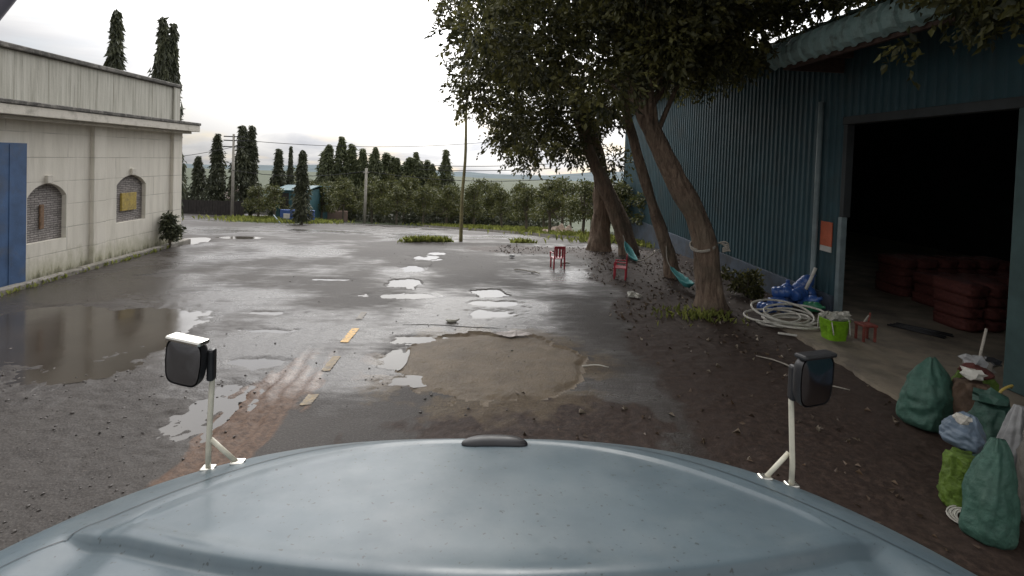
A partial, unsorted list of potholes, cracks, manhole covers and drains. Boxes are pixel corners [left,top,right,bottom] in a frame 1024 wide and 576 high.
pothole [383,278,424,290]
pothole [395,331,589,407]
